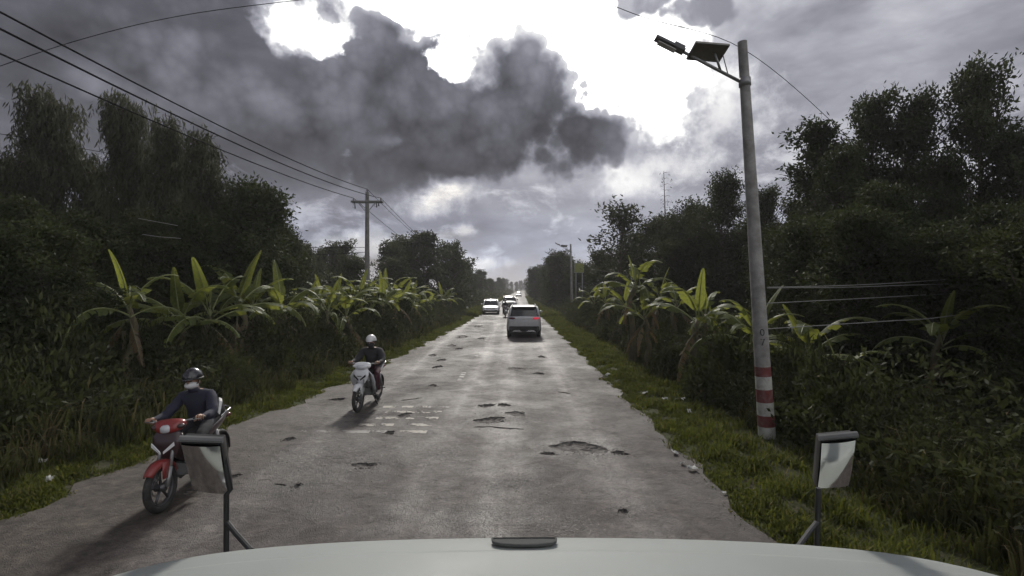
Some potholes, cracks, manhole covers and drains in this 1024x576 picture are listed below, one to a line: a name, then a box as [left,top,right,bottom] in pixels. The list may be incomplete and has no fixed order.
pothole [465,415,510,426]
pothole [541,439,623,456]
pothole [347,461,382,469]
